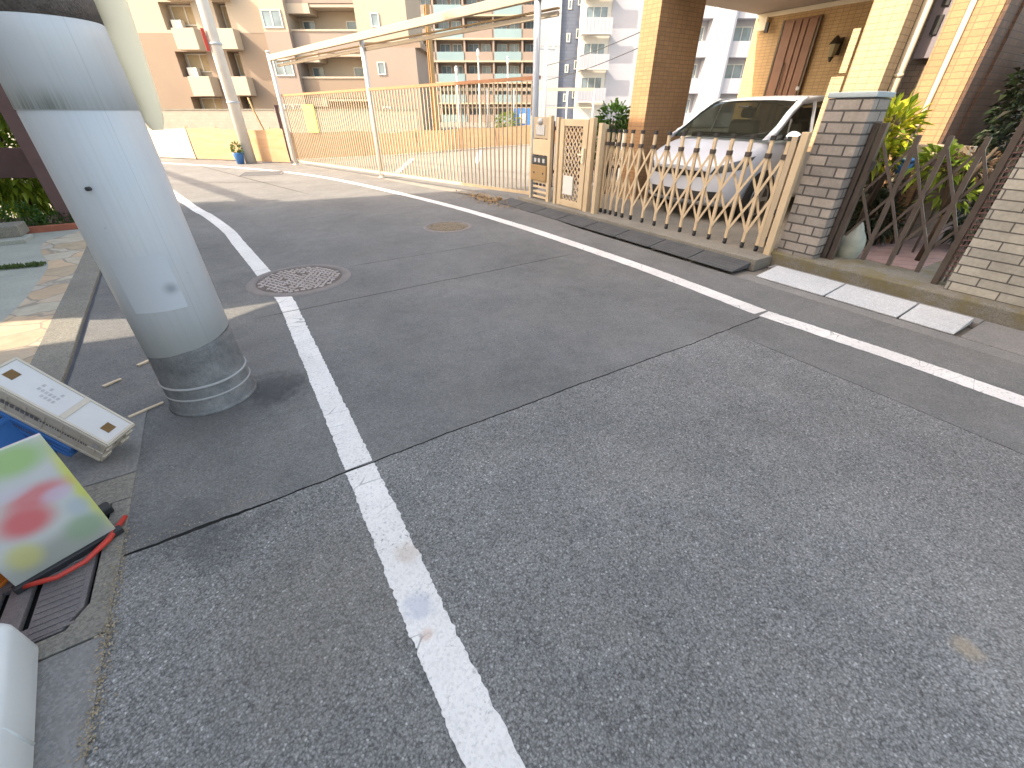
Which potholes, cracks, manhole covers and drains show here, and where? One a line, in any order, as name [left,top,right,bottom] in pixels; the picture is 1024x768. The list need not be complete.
manhole cover [245,264,351,297]
manhole cover [423,221,473,233]
